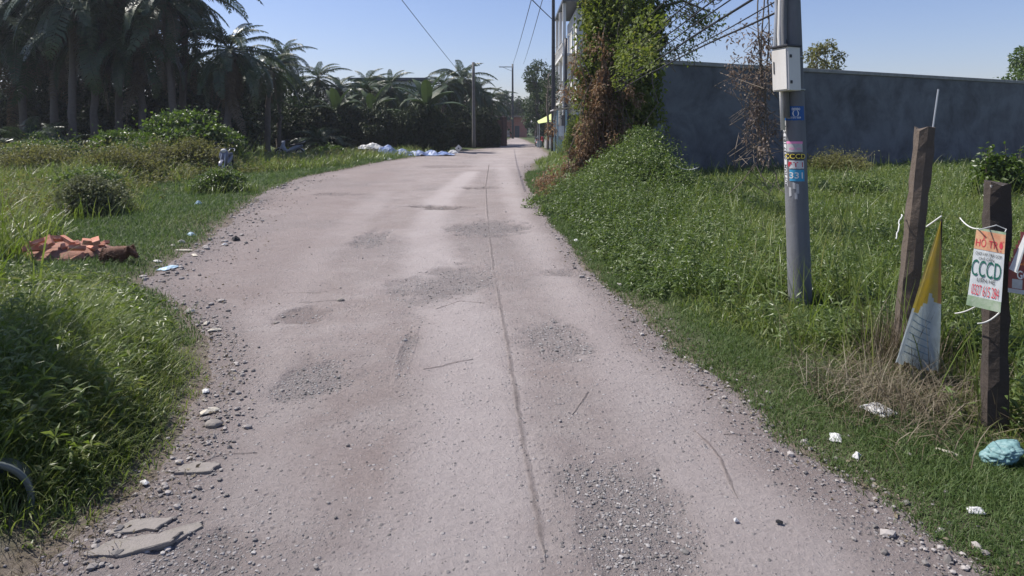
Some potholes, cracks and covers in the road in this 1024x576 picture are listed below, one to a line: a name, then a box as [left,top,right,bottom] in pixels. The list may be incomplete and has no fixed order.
crack [572,392,588,415]
crack [693,429,762,497]
pothole [268,302,340,331]
crack [423,359,473,370]
crack [437,165,546,562]
pothole [389,322,419,392]
